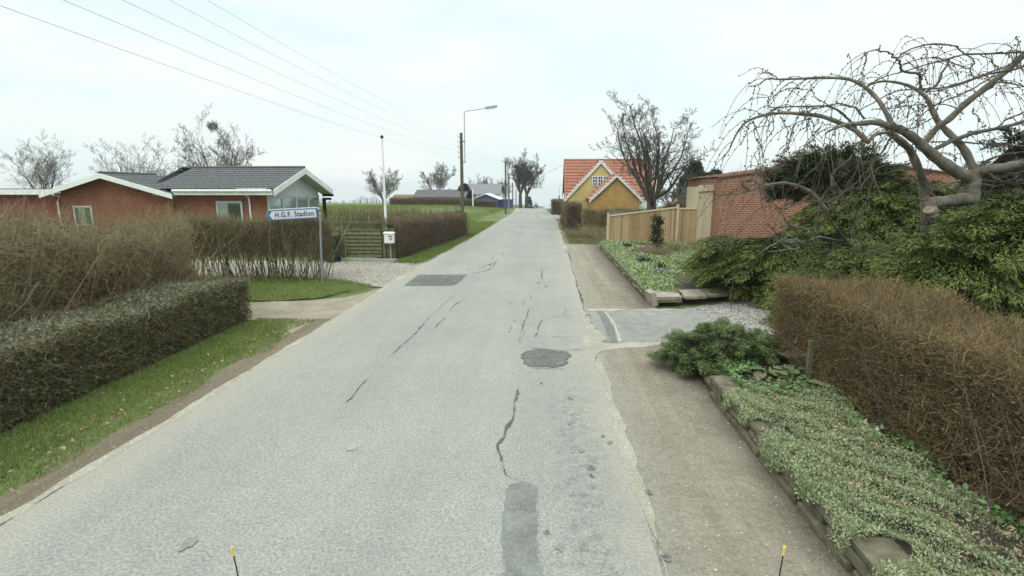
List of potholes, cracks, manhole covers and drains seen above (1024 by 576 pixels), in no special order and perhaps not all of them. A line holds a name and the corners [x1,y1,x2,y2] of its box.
crack [508,252,586,350]
crack [496,390,519,478]
